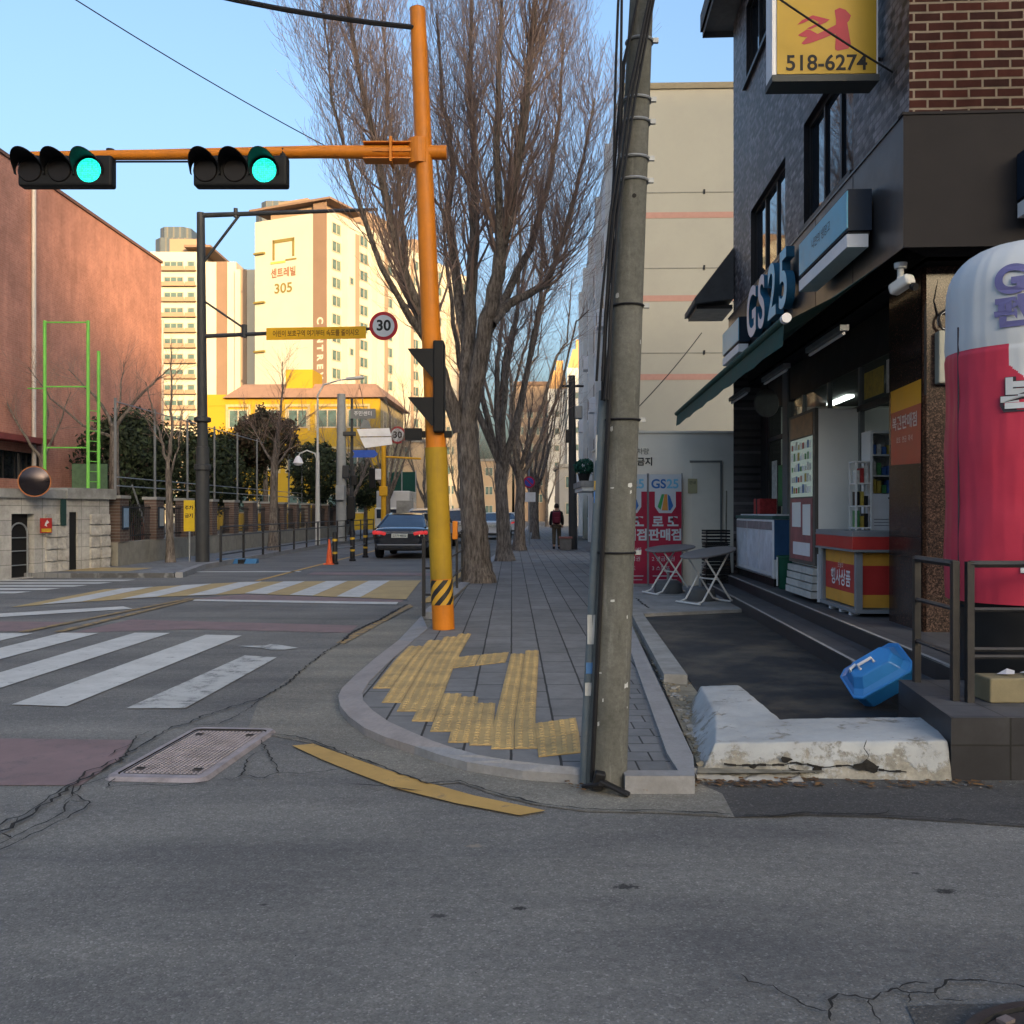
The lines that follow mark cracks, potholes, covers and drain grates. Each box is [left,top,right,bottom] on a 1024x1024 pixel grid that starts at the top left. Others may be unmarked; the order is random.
crack [0,642,340,849]
manhole cover [105,727,276,783]
crack [740,973,1024,1021]
